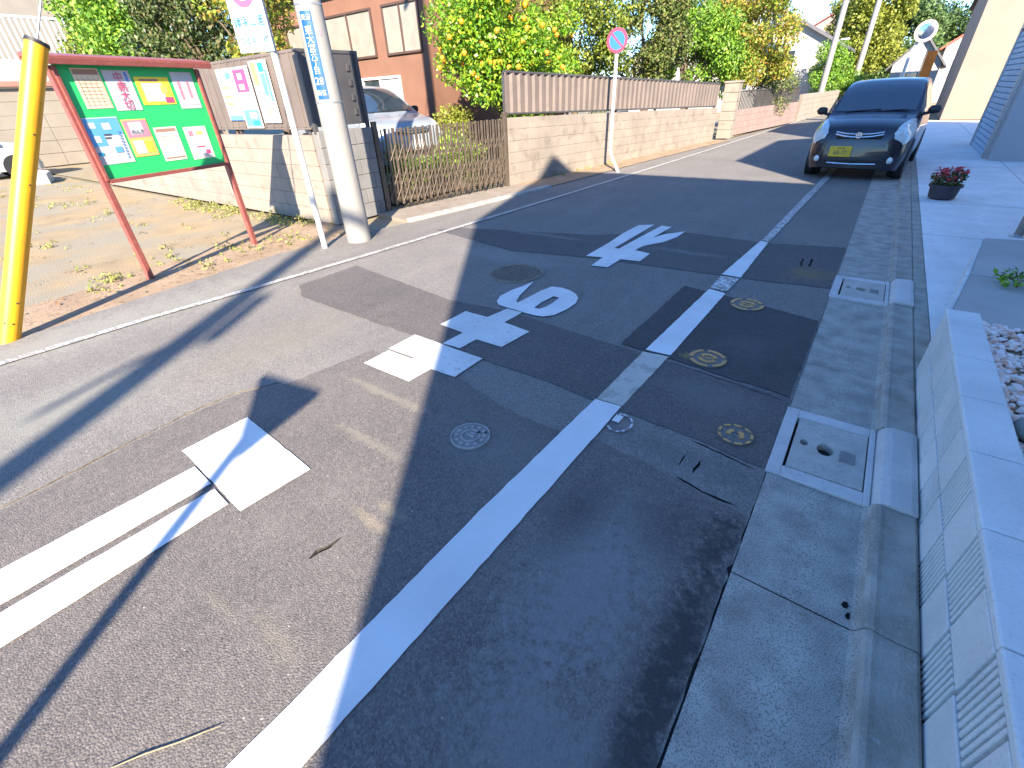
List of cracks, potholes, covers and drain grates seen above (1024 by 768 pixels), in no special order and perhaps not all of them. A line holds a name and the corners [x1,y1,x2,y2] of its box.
crack [309,537,341,559]
manhole cover [730,298,764,311]
manhole cover [489,264,543,283]
manhole cover [717,424,754,446]
crack [656,439,755,768]
manhole cover [689,349,727,368]
manhole cover [450,423,490,450]
